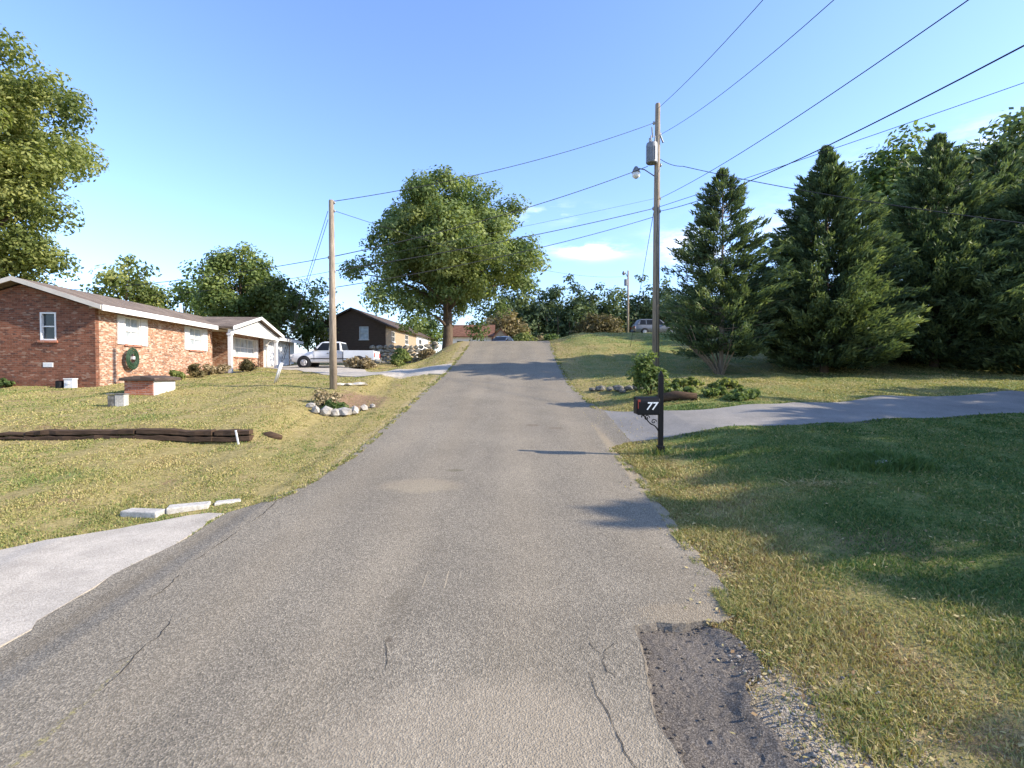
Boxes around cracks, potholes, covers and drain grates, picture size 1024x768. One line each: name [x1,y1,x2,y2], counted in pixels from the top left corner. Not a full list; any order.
crack [104,615,173,688]
crack [589,642,637,768]
